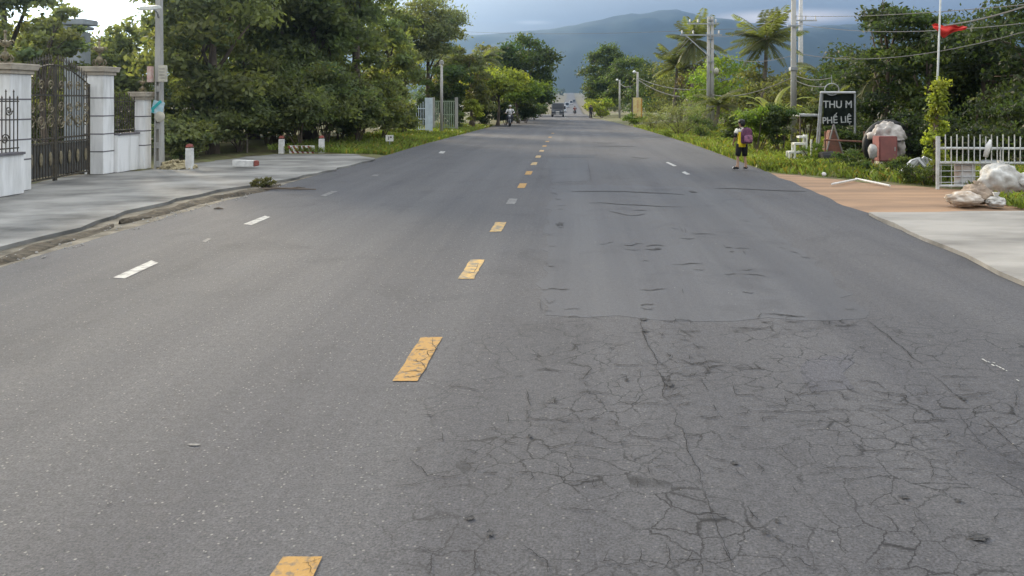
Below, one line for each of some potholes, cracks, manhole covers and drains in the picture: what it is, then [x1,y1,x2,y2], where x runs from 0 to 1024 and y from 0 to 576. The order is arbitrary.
crack [387,288,1023,573]
crack [551,165,684,223]
